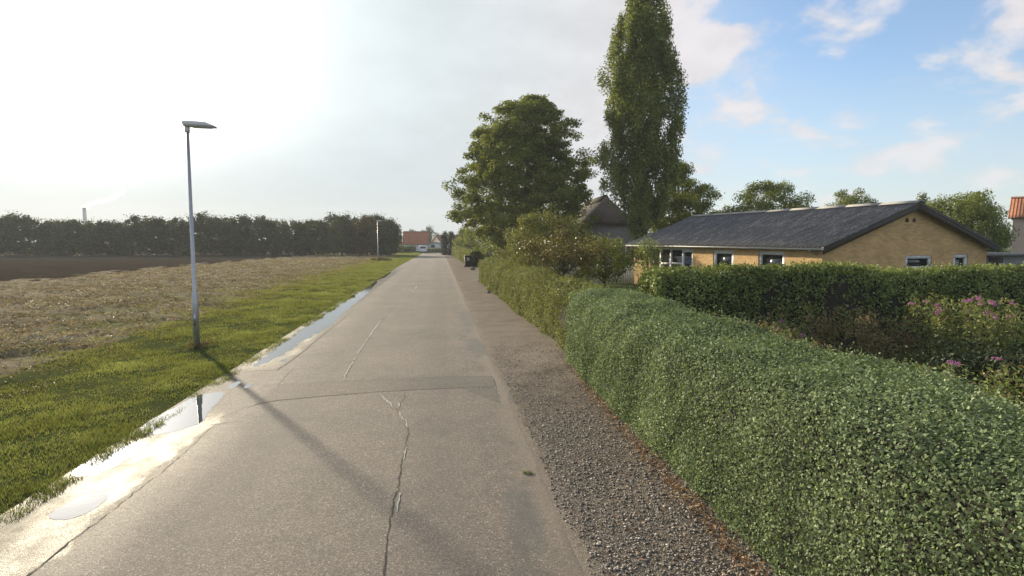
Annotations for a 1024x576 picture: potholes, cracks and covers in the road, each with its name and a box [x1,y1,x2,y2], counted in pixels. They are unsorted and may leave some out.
crack [211,286,497,576]
